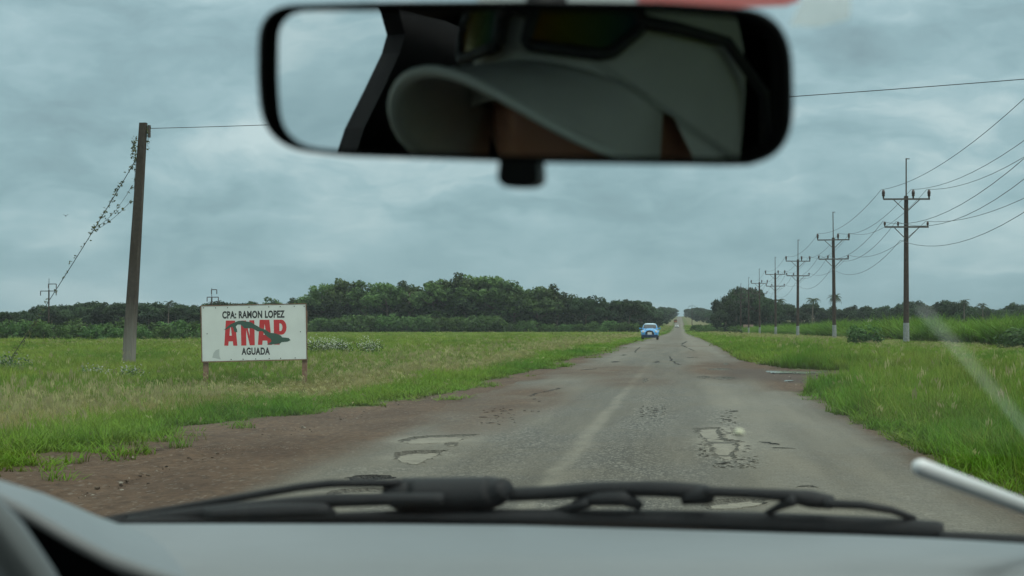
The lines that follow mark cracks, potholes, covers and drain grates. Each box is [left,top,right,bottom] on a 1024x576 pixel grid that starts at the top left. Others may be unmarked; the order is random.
crack [640,406,666,417]
crack [668,341,699,365]
pothole [397,434,480,444]
crack [479,388,563,425]
pothole [391,450,447,465]
pothole [693,427,746,461]
crack [698,409,796,469]
